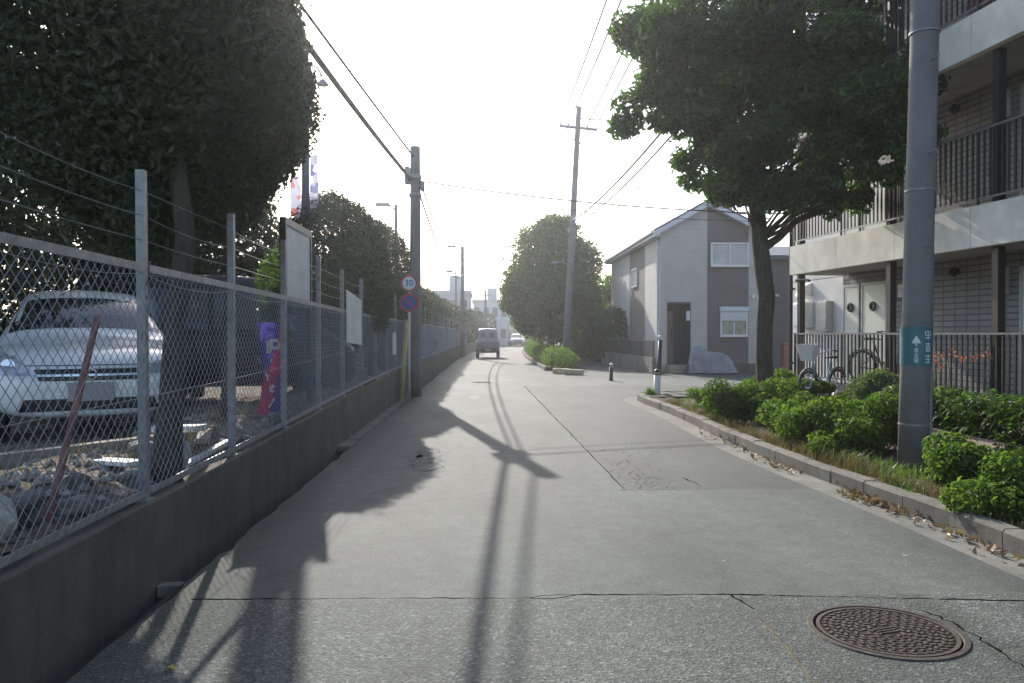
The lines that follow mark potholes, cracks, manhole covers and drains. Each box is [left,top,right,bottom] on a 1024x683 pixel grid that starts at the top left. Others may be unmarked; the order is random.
manhole cover [806,605,973,662]
crack [191,593,1024,683]
crack [525,387,688,490]
